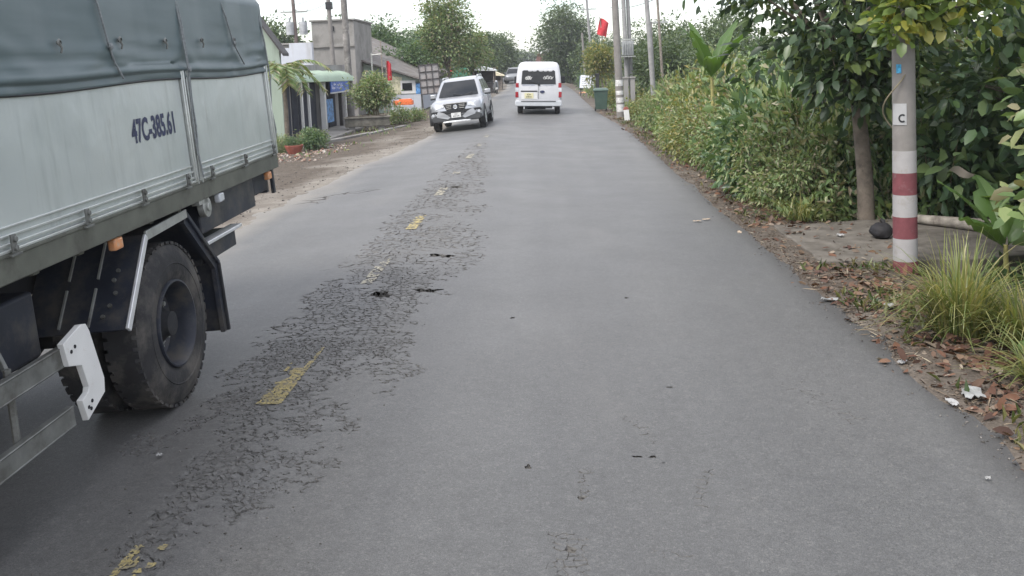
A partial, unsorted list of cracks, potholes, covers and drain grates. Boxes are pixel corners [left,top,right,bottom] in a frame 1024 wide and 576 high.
crack [546,531,590,576]
crack [695,468,714,508]
crack [100,143,492,576]
crack [577,468,595,498]
